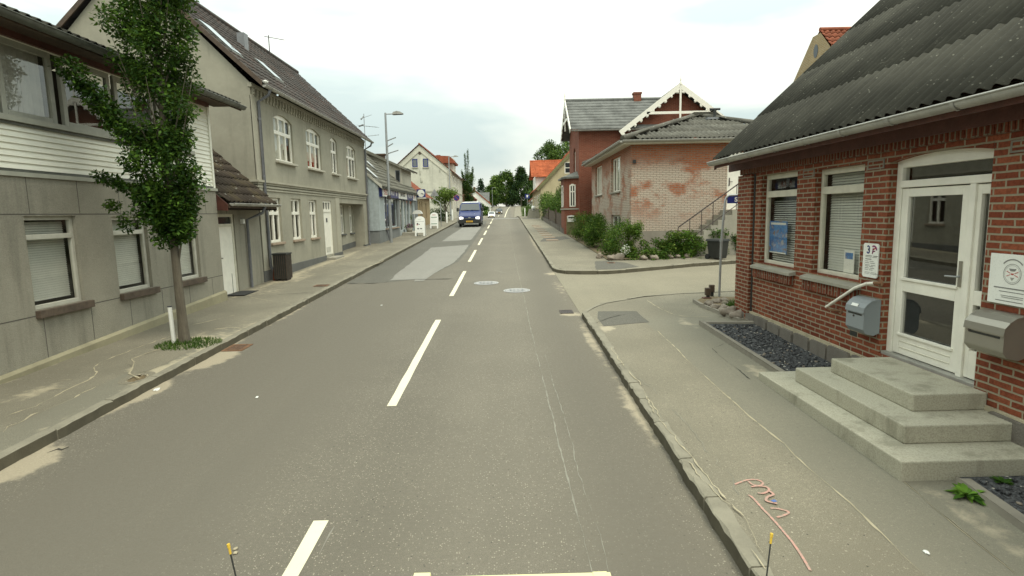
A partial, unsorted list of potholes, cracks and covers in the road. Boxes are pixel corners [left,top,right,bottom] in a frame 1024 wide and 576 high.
crack [5,338,165,430]
crack [494,226,608,571]
